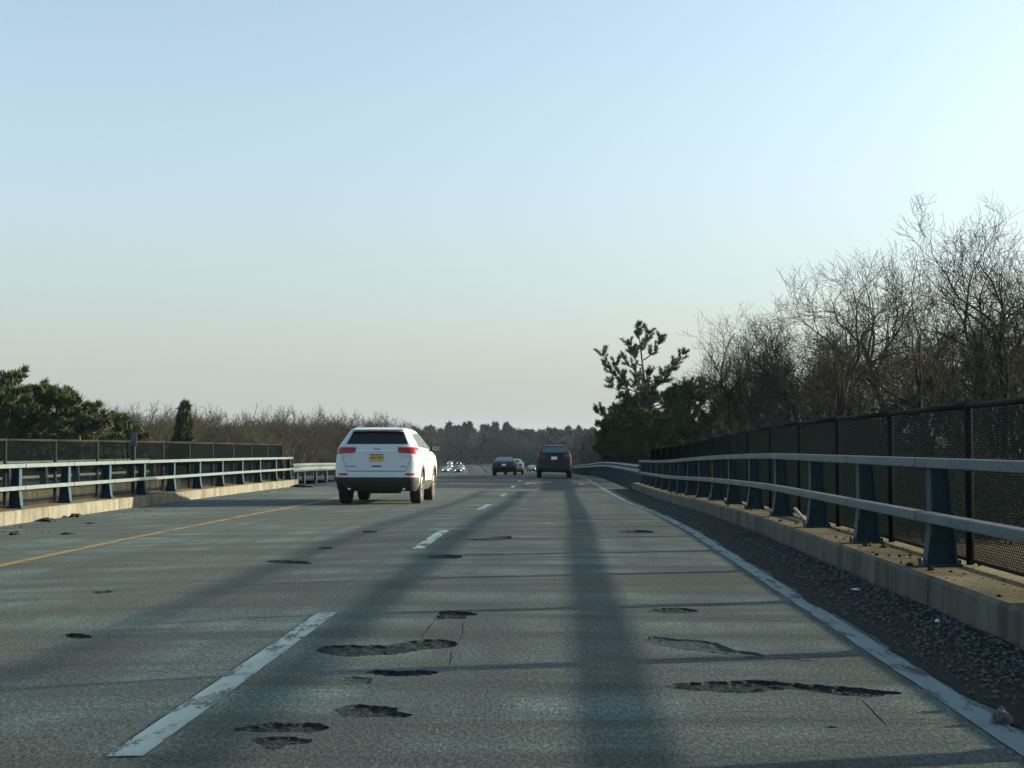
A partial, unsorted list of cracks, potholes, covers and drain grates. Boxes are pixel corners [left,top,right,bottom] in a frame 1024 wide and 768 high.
pothole [234,722,330,733]
pothole [315,639,458,657]
pothole [433,610,478,620]
pothole [250,736,312,751]
pothole [333,704,414,718]
pothole [639,636,765,660]
pothole [665,680,902,698]
crack [422,621,465,667]
